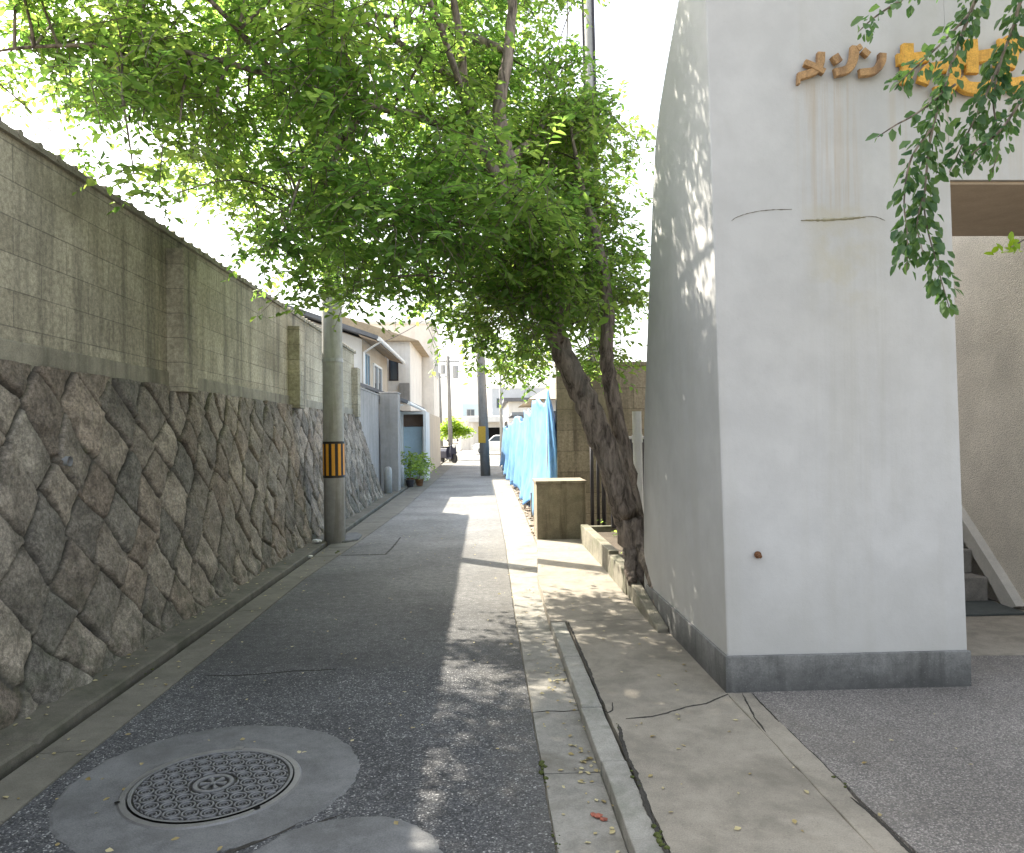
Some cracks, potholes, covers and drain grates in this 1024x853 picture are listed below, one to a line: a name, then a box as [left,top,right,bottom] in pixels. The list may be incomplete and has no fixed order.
manhole cover [48,725,360,853]
crack [537,622,779,853]
